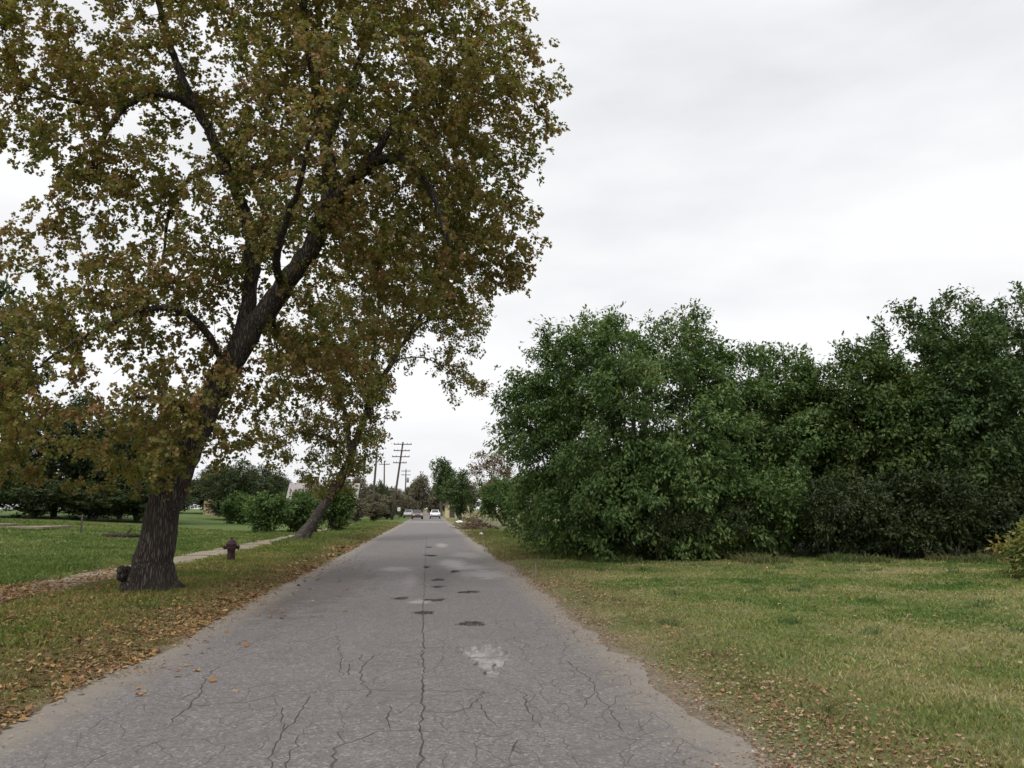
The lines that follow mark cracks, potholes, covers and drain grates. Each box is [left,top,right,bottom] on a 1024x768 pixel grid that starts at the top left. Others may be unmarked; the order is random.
crack [42,615,712,768]
